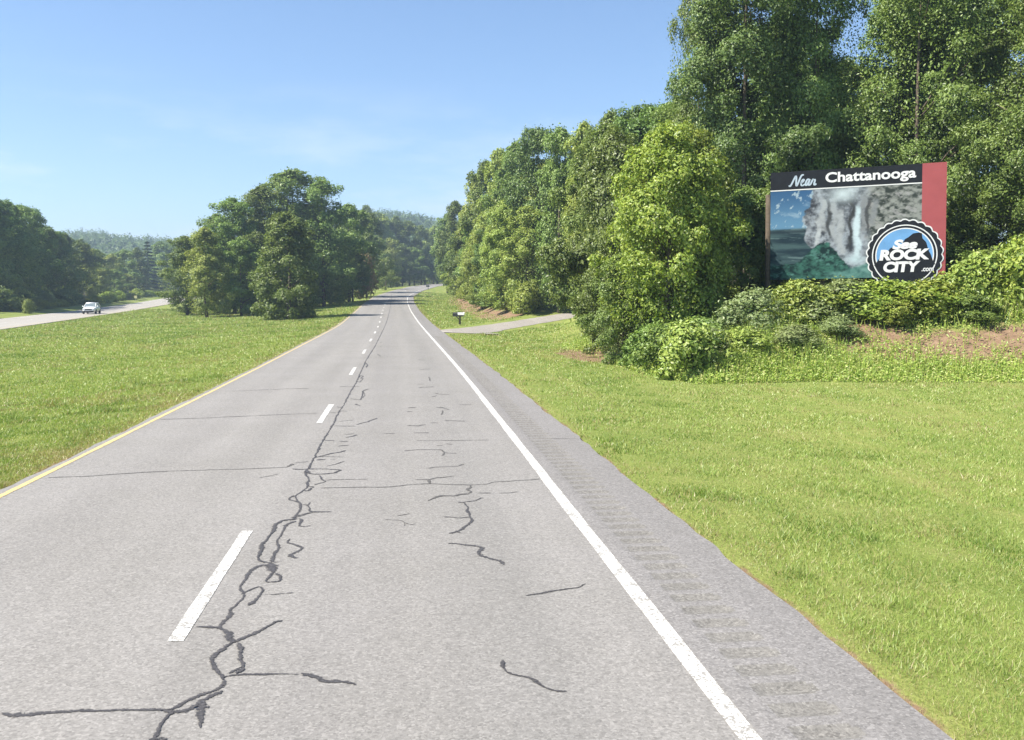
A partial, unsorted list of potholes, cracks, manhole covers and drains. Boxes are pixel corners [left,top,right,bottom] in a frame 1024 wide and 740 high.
crack [527,583,586,596]
crack [49,464,293,478]
crack [328,378,575,500]
